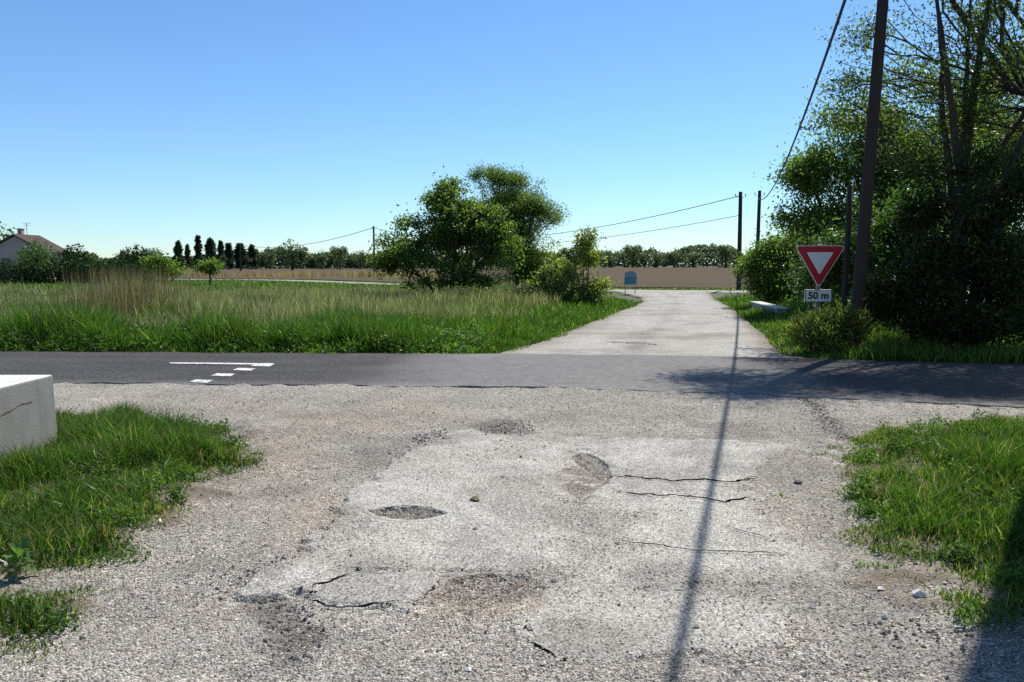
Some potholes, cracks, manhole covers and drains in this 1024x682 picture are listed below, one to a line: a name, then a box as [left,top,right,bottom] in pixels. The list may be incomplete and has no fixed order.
crack [303,571,445,610]
crack [613,474,760,504]
pothole [426,570,549,611]
crack [614,526,783,556]
pothole [363,504,453,522]
crack [465,618,564,663]
